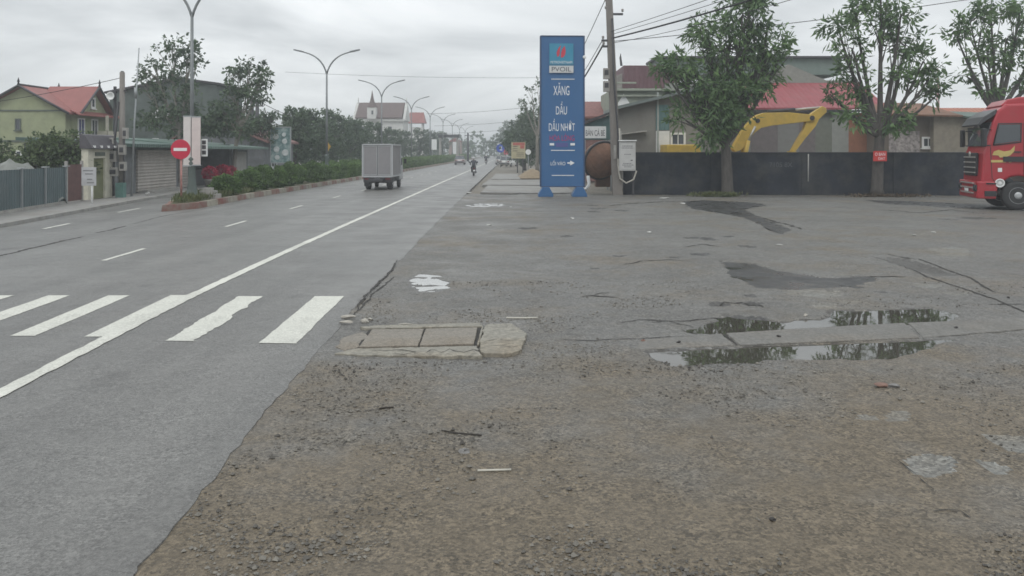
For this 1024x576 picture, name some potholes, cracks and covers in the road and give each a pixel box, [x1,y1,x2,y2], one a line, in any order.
manhole cover [420,327,477,347]
crack [353,260,397,315]
crack [569,302,764,341]
manhole cover [359,329,424,348]
